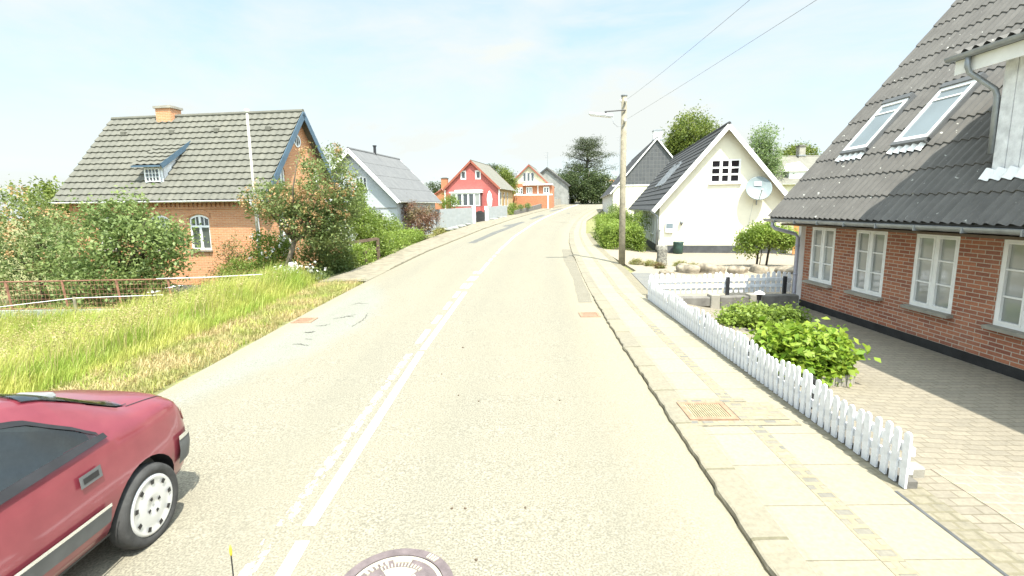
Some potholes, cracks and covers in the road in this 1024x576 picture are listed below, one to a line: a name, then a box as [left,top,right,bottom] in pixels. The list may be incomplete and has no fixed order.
manhole cover [344,548,453,576]
